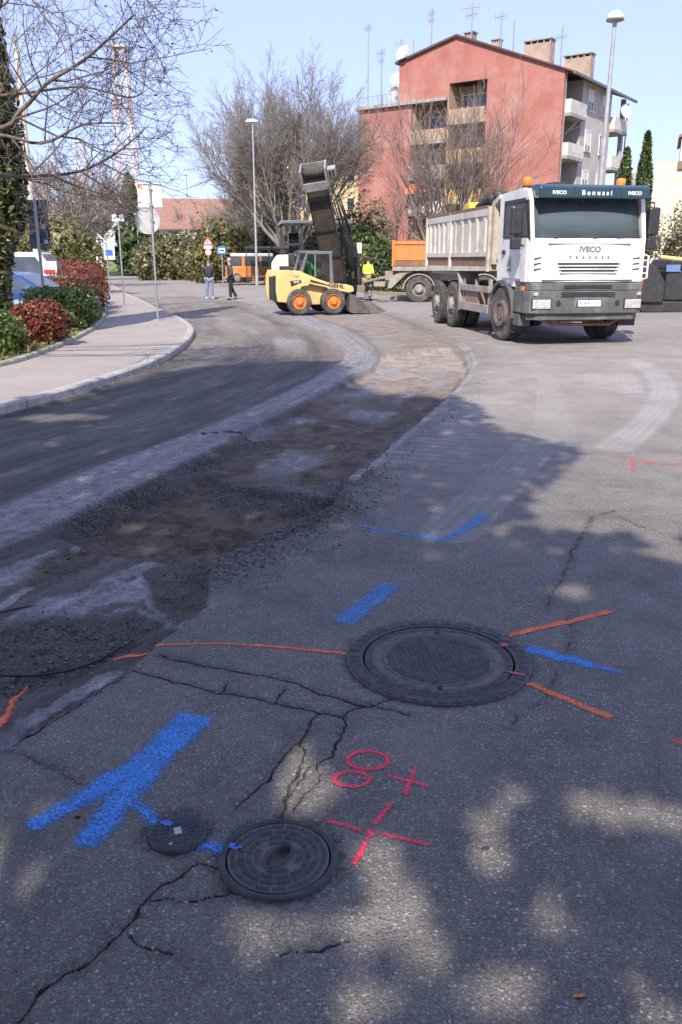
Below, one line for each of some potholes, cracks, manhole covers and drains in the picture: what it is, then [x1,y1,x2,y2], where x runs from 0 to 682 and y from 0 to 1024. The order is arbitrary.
manhole cover [219,819,338,903]
manhole cover [148,814,207,855]
crack [279,940,350,958]
crack [19,863,235,1024]
crack [132,654,410,819]
pothole [21,548,105,588]
pothole [144,565,207,619]
crack [23,754,82,785]
manhole cover [346,620,532,707]
crack [512,510,682,725]
